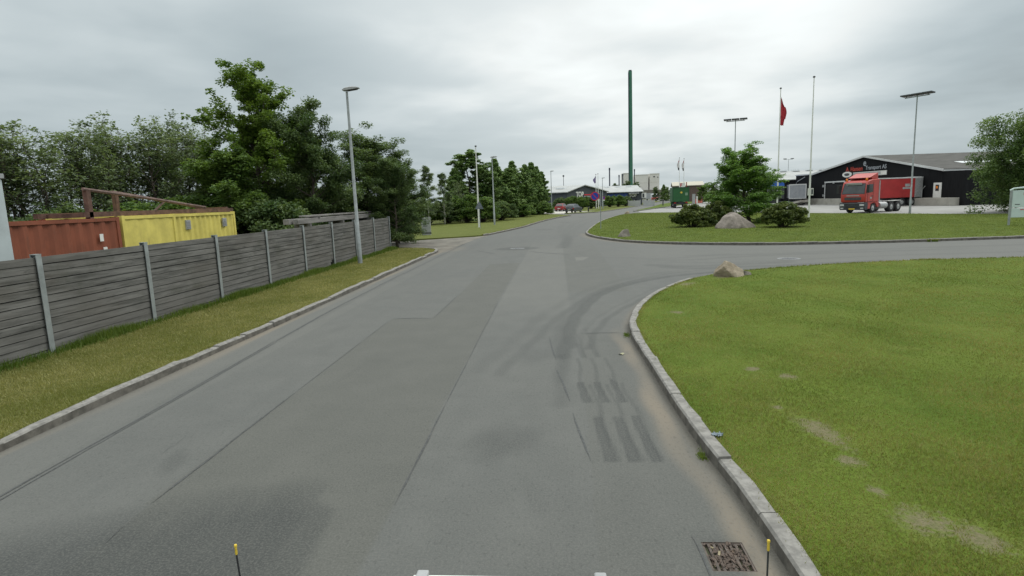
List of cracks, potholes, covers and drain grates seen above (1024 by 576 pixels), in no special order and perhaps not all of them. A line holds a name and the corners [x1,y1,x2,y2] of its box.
drain grate [701,541,757,572]
